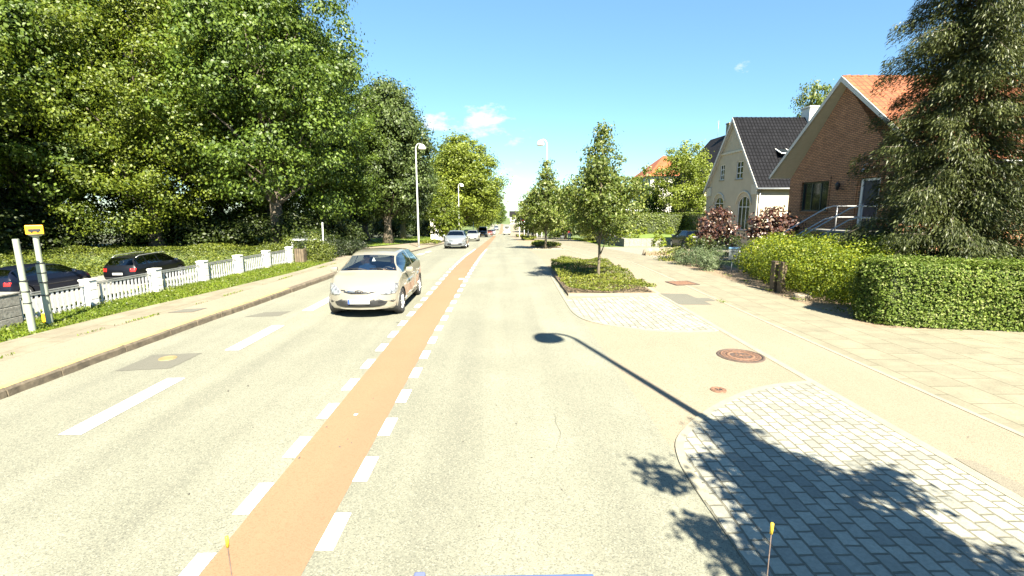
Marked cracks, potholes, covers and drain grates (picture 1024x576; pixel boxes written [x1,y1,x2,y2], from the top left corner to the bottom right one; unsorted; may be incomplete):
manhole cover [716,349,766,363]
